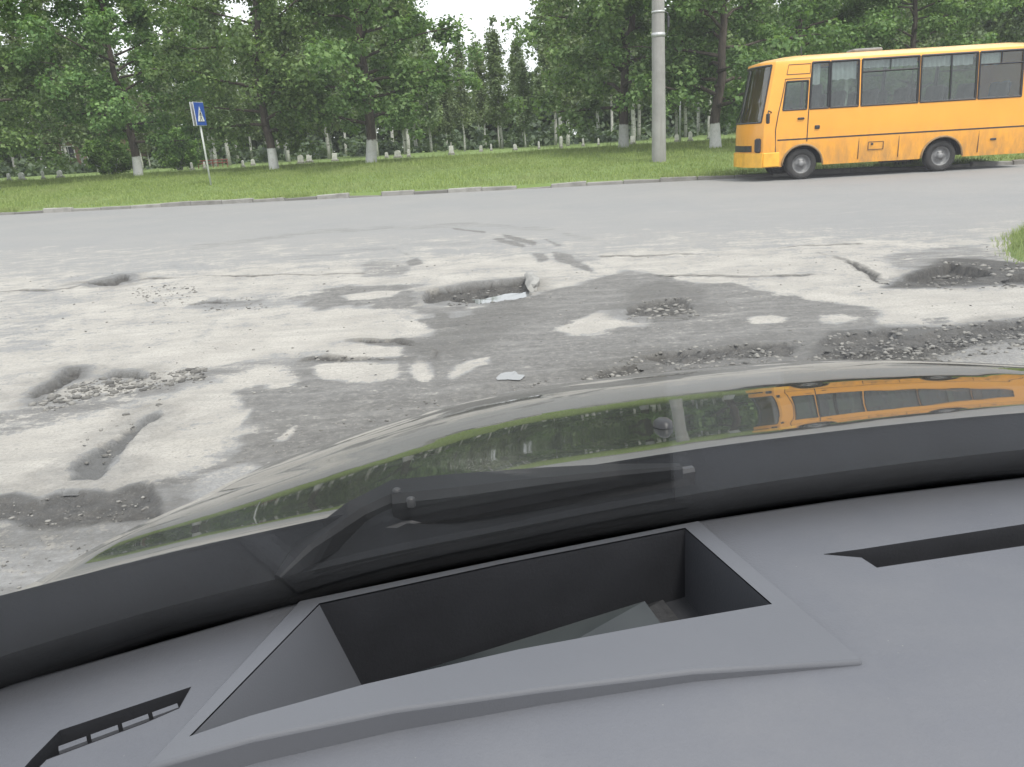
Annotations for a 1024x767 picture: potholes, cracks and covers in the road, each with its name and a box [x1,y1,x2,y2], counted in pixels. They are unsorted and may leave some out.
pothole [36,404,182,496]
pothole [610,296,707,322]
pothole [410,277,543,306]
pothole [975,272,1024,286]
pothole [73,273,144,288]
crack [594,242,918,287]
pothole [789,317,1024,361]
pothole [89,368,165,384]
pothole [0,474,189,539]
pothole [876,261,1012,288]
